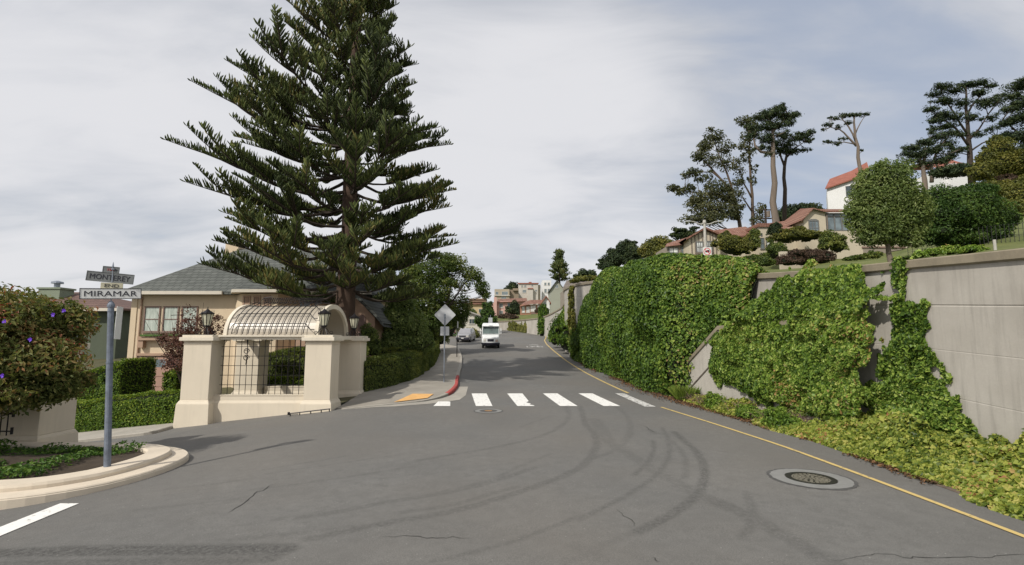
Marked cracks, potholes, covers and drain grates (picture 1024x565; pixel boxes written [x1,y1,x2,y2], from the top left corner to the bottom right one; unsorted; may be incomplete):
crack [840,553,1015,561]
manhole cover [766,468,859,490]
